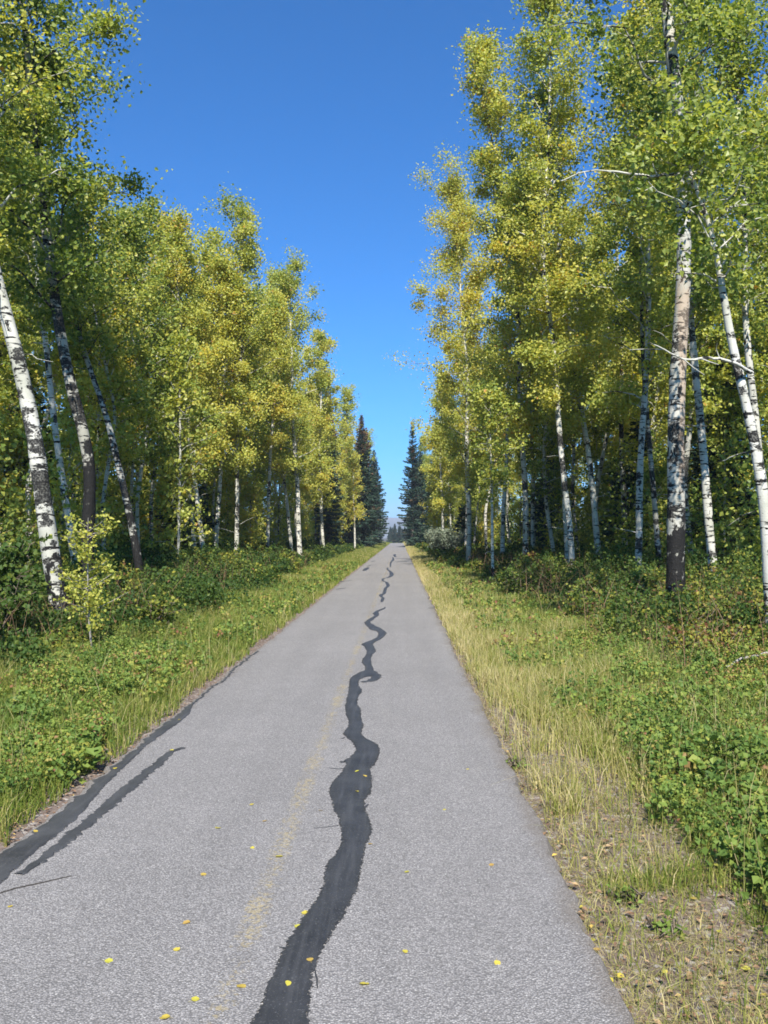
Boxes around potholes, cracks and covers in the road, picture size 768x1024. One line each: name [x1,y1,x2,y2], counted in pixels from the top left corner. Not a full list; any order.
crack [0,875,72,893]
